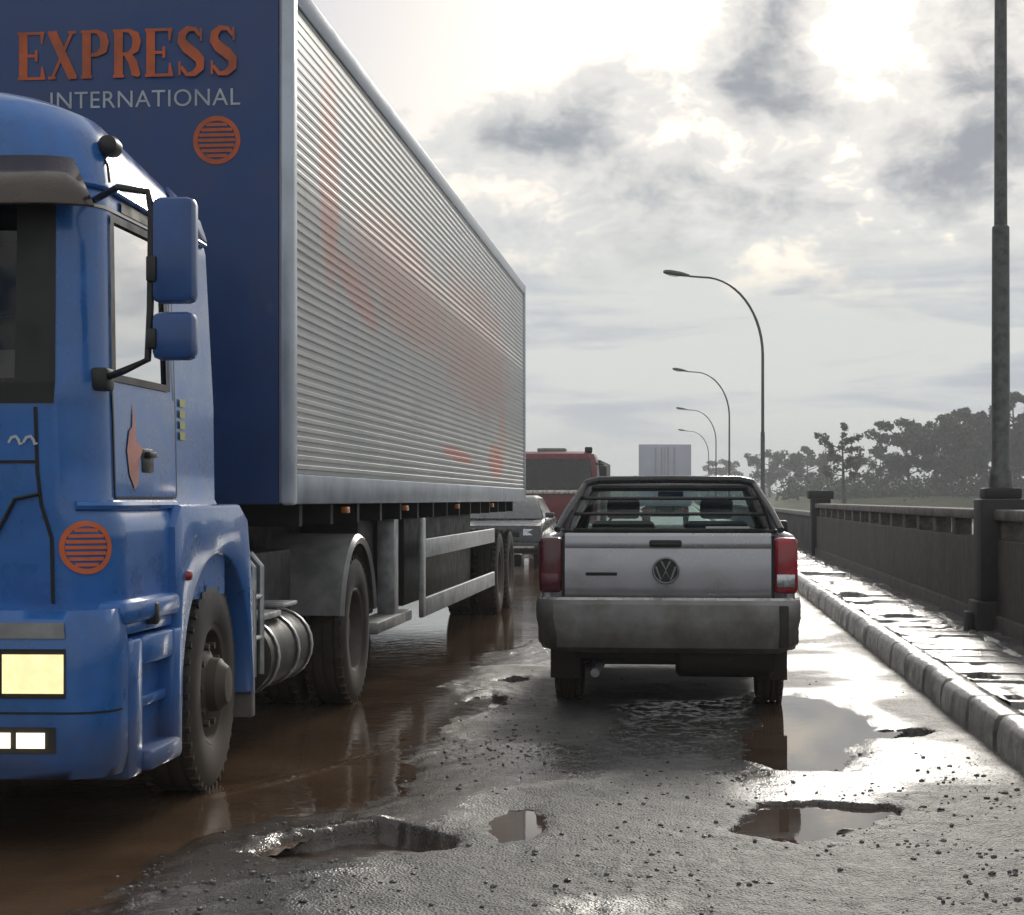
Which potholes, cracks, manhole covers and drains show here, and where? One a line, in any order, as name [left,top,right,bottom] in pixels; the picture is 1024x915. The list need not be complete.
pothole [731,801,901,833]
pothole [239,820,461,862]
pothole [465,694,509,715]
pothole [879,728,932,739]
